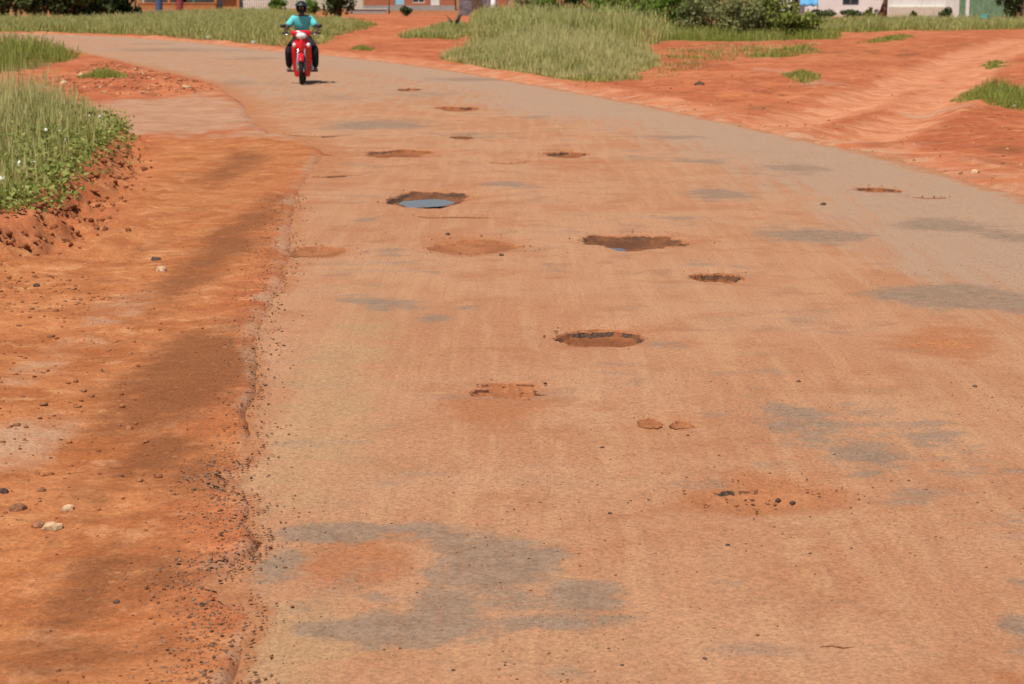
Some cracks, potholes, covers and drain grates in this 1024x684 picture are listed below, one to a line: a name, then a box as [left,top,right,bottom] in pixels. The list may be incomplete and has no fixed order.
pothole [679,488,820,512]
pothole [669,421,695,430]
pothole [386,191,471,209]
pothole [468,383,547,401]
pothole [551,329,647,347]
pothole [363,149,436,158]
pothole [687,273,745,283]
pothole [577,234,695,252]
pothole [637,417,663,429]
